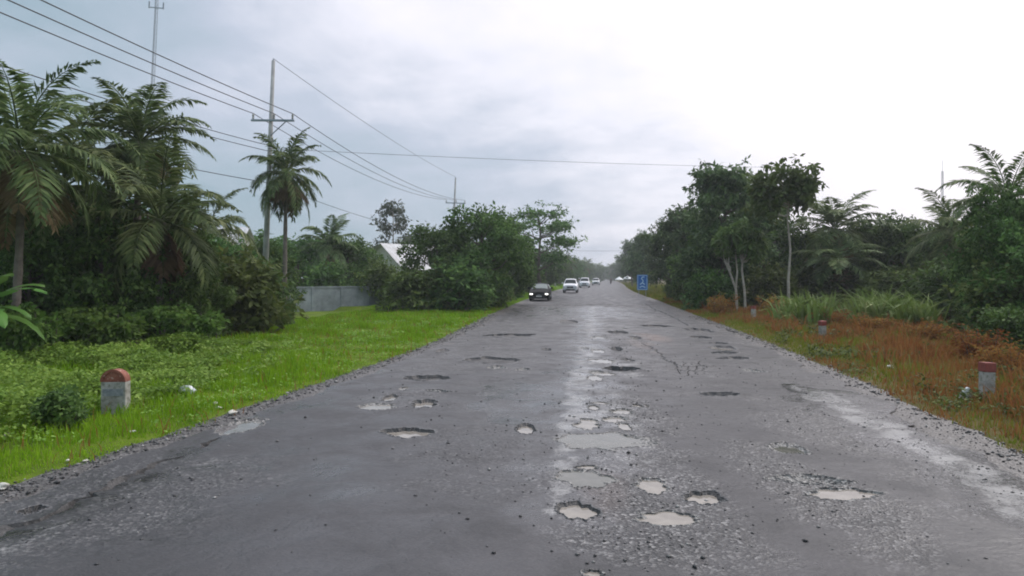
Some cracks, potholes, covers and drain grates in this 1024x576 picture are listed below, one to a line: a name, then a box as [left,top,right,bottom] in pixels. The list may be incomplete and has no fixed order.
pothole [514,423,538,435]
pothole [355,403,398,411]
pothole [552,431,661,451]
pothole [617,422,633,431]
pothole [764,441,813,455]
pothole [803,487,887,501]
pothole [570,418,602,430]
pothole [601,415,629,423]
pothole [377,427,438,439]
pothole [462,356,521,364]
crack [641,343,711,376]
pothole [681,489,729,505]
